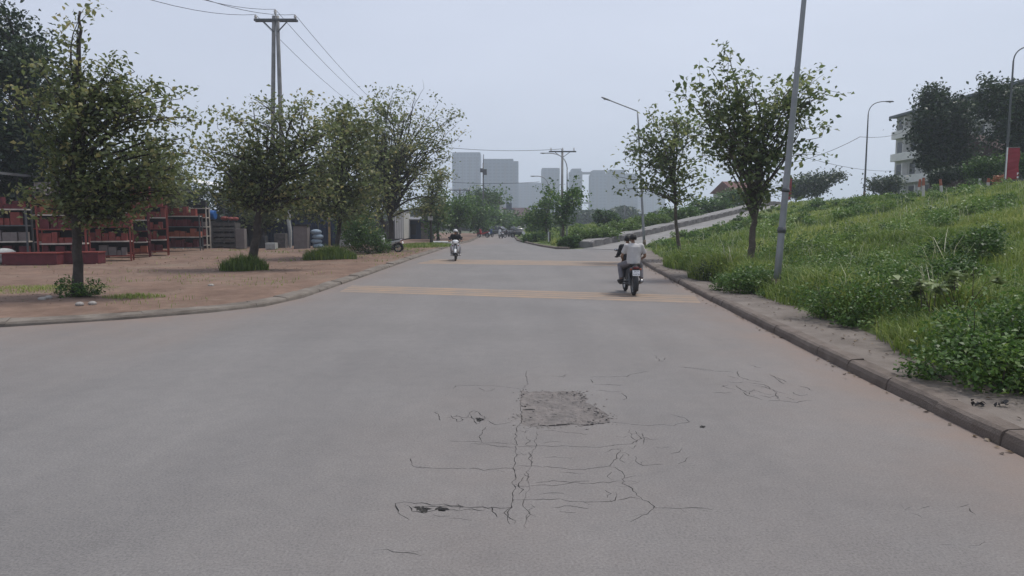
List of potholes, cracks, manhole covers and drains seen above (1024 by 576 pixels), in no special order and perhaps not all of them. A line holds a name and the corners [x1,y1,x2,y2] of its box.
crack [395,373,712,528]
crack [555,356,811,403]
